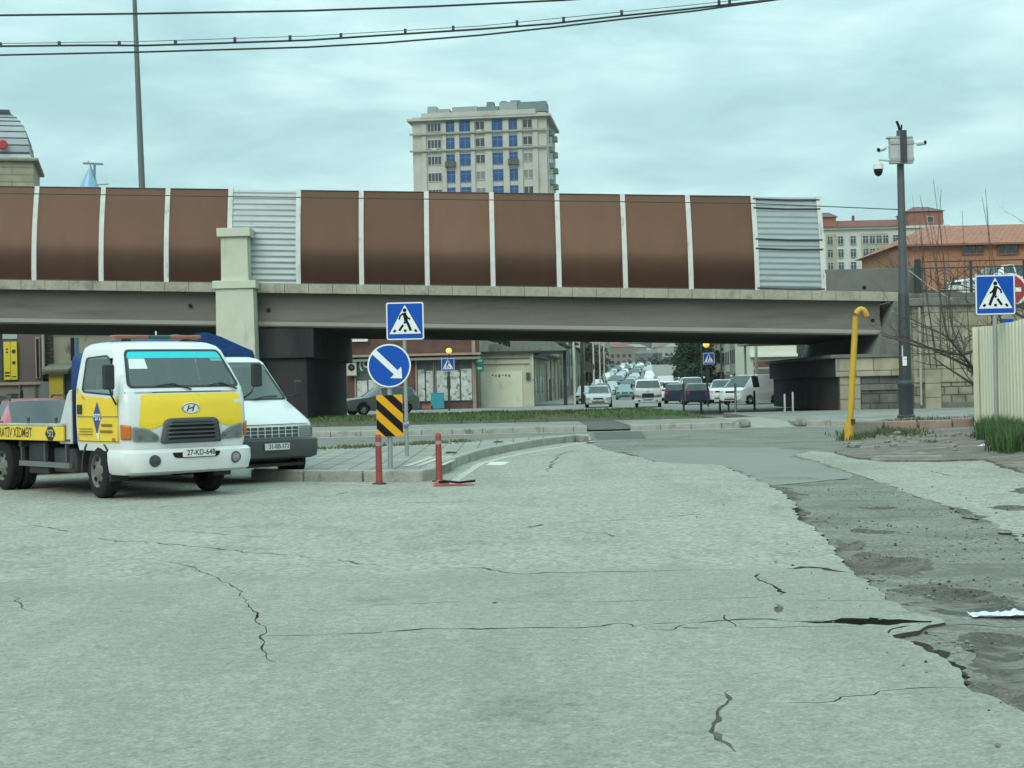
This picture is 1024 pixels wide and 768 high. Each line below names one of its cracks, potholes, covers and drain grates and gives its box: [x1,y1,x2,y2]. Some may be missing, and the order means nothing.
pothole [840,552,936,577]
crack [708,690,736,752]
pothole [950,507,993,523]
pothole [968,682,1024,712]
pothole [889,583,1024,617]
crack [88,530,862,663]
crack [793,624,1014,703]
